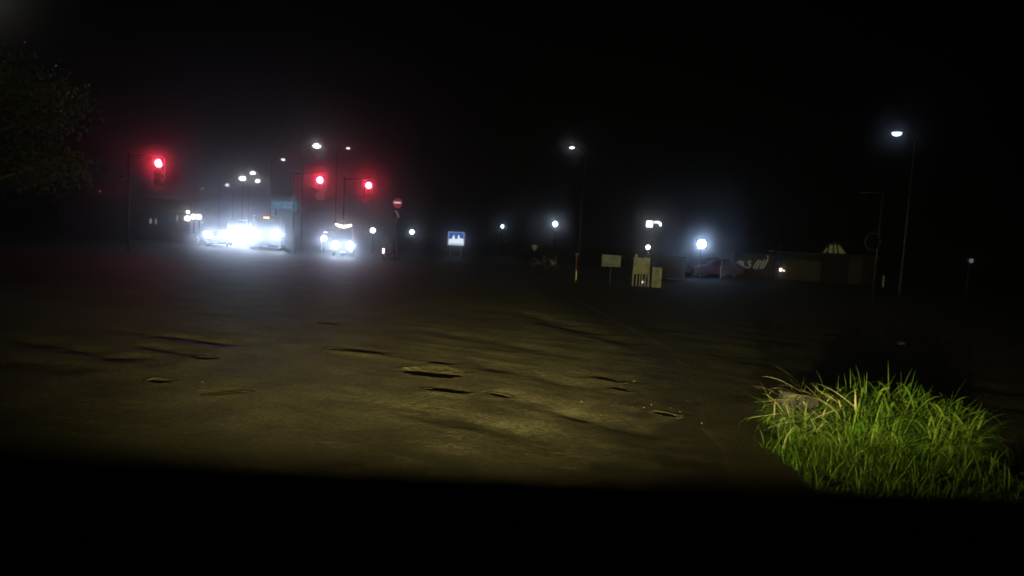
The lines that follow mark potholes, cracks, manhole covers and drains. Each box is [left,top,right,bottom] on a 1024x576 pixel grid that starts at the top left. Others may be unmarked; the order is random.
pothole [483,391,516,399]
pothole [321,347,398,356]
pothole [141,376,179,384]
pothole [419,387,474,395]
pothole [396,365,471,379]
pothole [586,375,627,384]
pothole [647,409,683,419]
